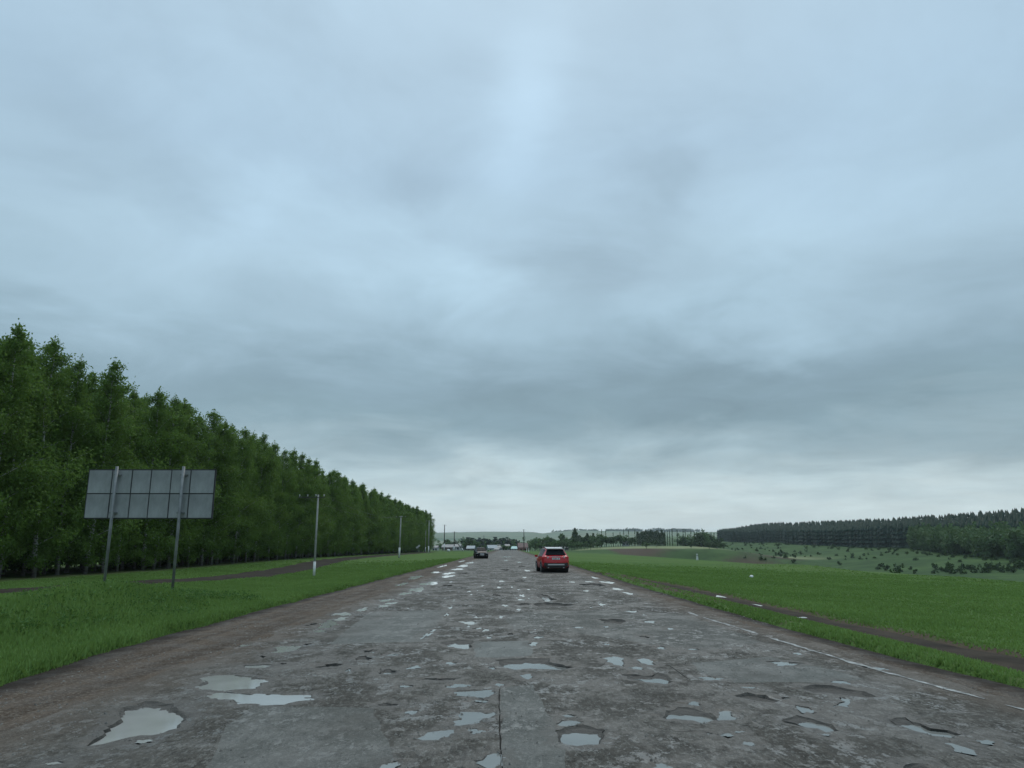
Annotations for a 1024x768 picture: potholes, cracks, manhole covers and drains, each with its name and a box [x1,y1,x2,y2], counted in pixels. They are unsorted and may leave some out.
pothole [87,701,189,746]
pothole [802,684,876,697]
pothole [417,730,454,740]
pothole [890,717,961,738]
pothole [195,675,268,691]
pothole [734,692,780,703]
pothole [555,724,605,746]
pothole [454,689,494,698]
pothole [663,707,717,723]
pothole [602,657,624,667]
pothole [622,673,672,684]
pothole [206,692,315,705]
